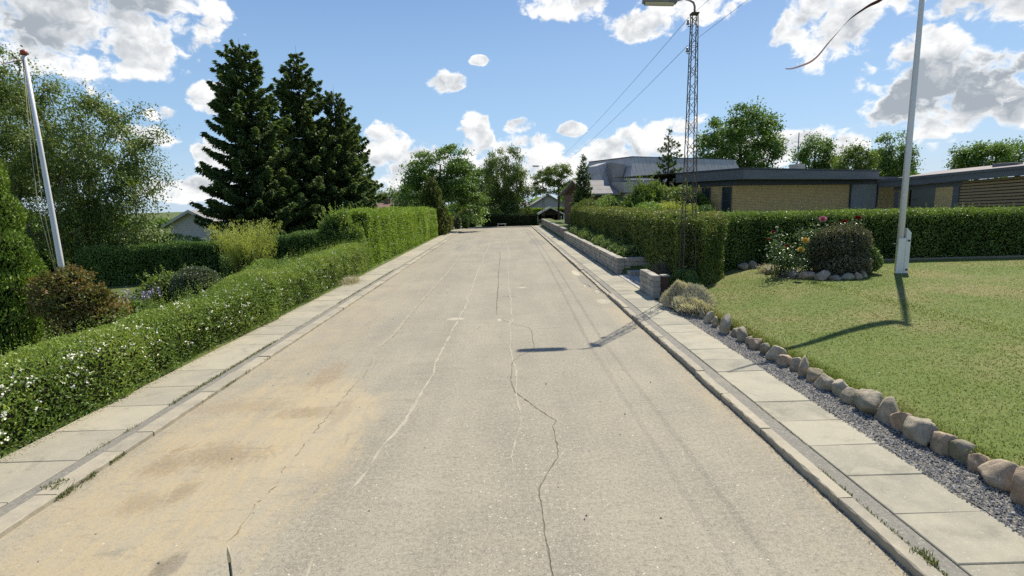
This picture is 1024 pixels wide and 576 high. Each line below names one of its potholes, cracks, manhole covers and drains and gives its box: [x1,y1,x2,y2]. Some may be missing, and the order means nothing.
crack [343,242,559,576]
